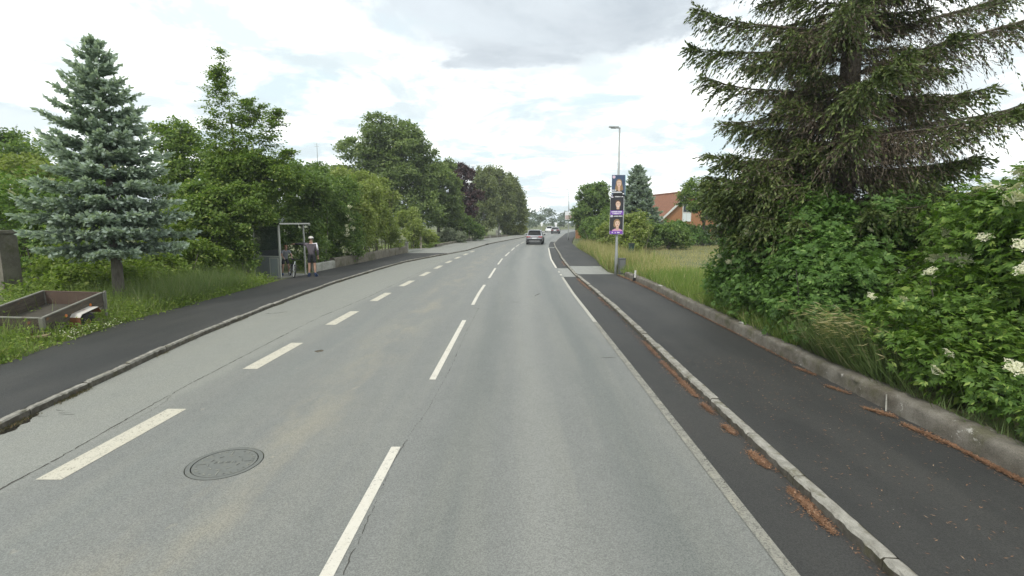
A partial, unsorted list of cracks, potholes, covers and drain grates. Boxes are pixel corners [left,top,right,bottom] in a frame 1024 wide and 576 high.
manhole cover [184,447,264,481]
